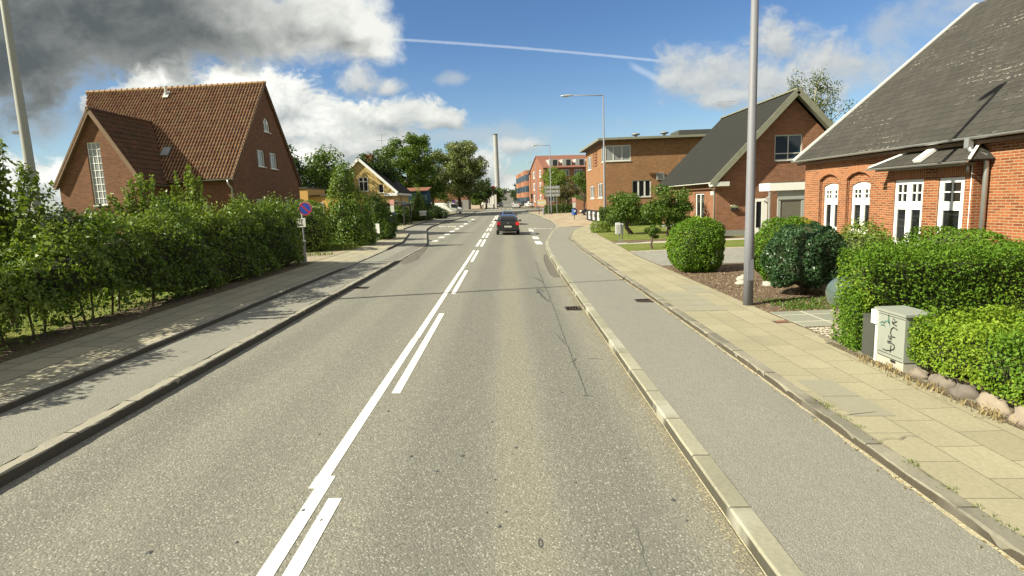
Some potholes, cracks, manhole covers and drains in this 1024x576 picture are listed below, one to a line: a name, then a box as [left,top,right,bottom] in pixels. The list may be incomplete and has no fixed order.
crack [531,260,595,396]
